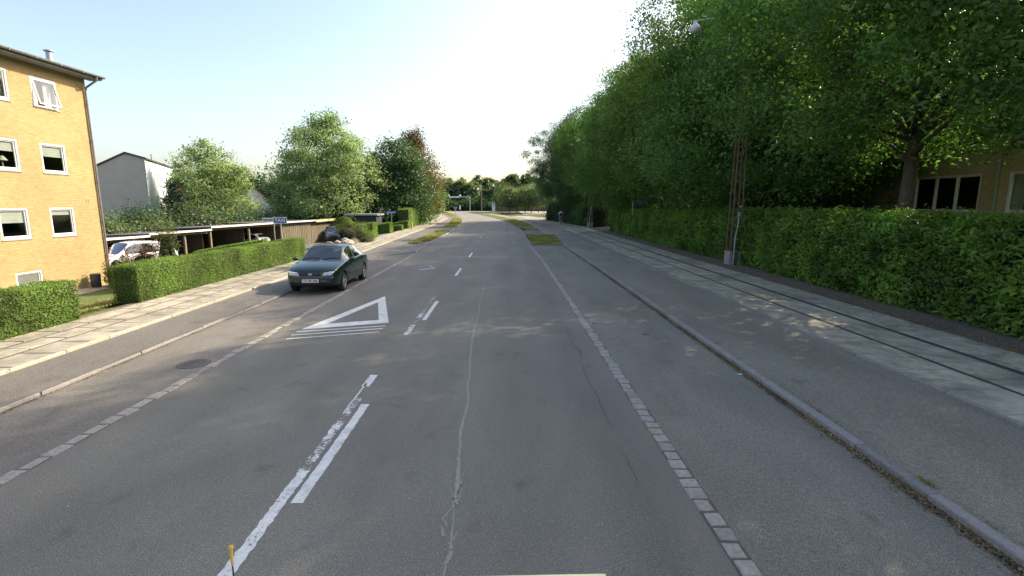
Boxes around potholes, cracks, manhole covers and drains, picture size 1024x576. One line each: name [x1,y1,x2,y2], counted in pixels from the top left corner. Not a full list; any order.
manhole cover [176,359,212,369]
crack [439,280,485,576]
crack [561,319,612,426]
